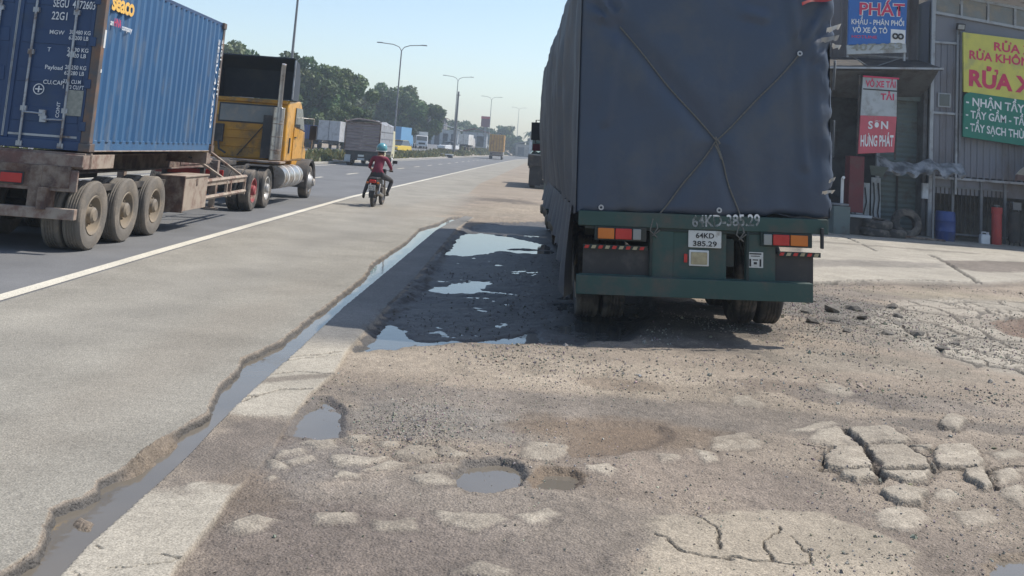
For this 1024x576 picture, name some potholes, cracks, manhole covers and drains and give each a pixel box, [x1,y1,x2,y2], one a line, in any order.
crack [802,428,1024,491]
pothole [562,418,685,461]
pothole [349,221,663,354]
pothole [445,454,596,496]
crack [653,513,815,566]
